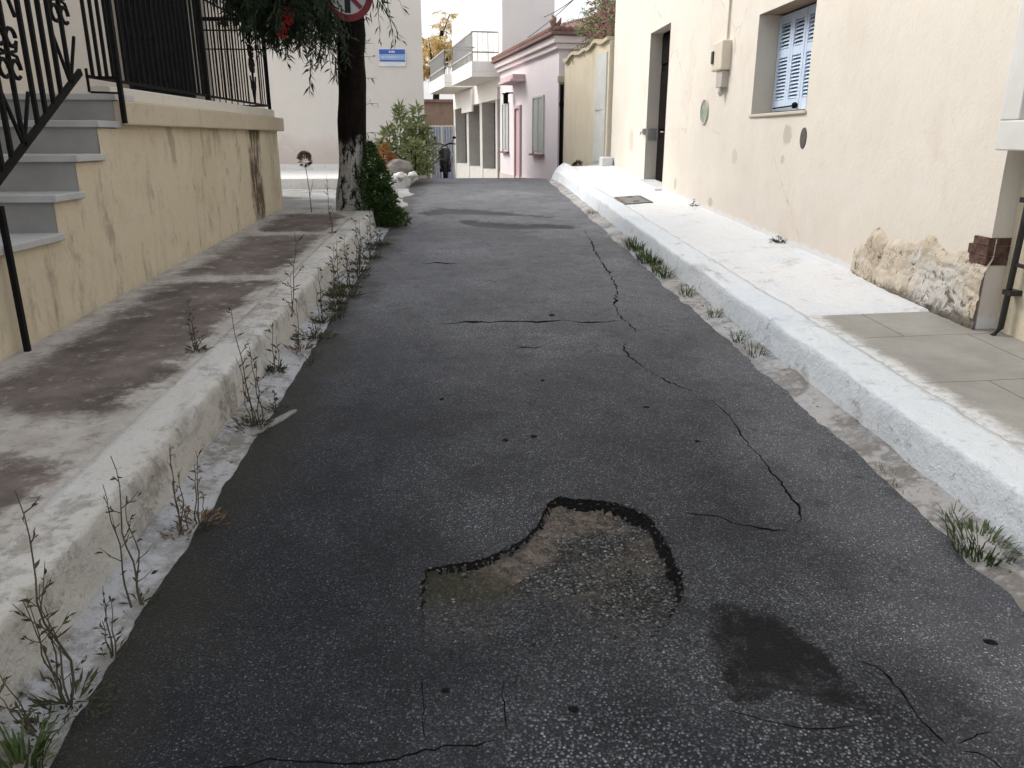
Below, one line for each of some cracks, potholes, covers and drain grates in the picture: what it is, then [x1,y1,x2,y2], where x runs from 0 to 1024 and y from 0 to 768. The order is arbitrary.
crack [216,673,508,768]
manhole cover [614,195,653,205]
pothole [419,496,687,679]
crack [447,232,802,532]
crack [715,661,1002,768]
